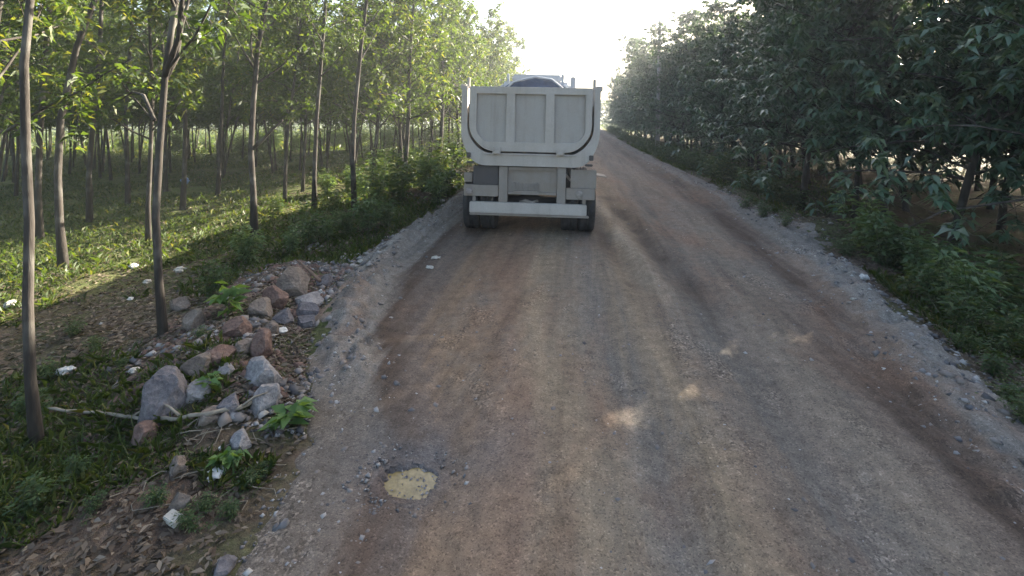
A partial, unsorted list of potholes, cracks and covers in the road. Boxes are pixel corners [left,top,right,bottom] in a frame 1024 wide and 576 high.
pothole [368,457,451,509]
